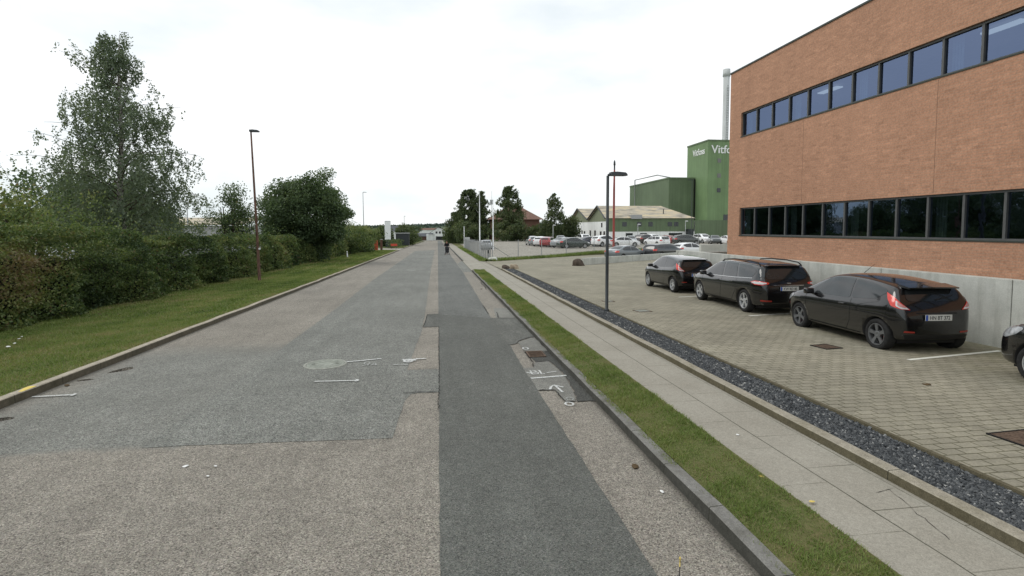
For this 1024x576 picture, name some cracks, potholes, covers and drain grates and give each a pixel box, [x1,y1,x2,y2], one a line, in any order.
manhole cover [303,359,348,370]
